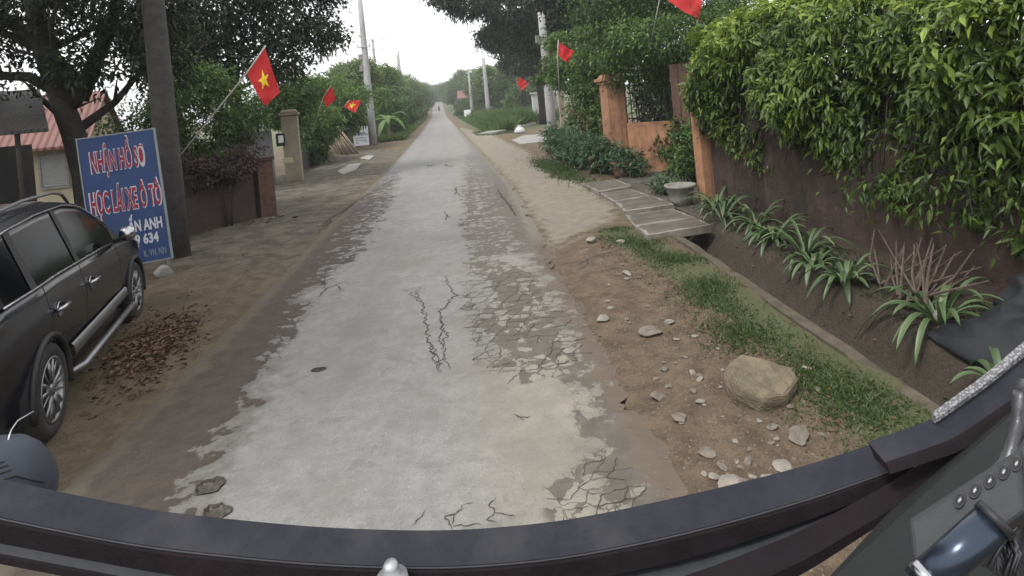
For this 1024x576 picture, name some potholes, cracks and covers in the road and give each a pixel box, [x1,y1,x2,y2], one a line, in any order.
crack [403,271,592,383]
pothole [203,502,232,518]
crack [444,187,516,226]
crack [548,450,647,520]
pothole [194,476,226,496]
crack [444,497,513,528]
